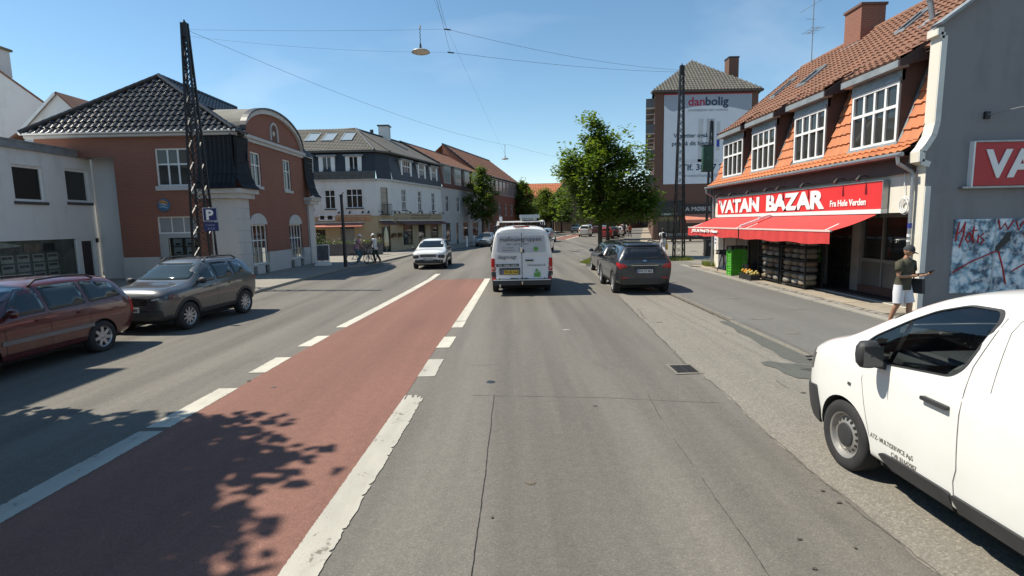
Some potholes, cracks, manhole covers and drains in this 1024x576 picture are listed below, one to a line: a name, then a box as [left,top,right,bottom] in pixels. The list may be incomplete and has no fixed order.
crack [471,398,494,576]
drain grate [670,365,698,373]
